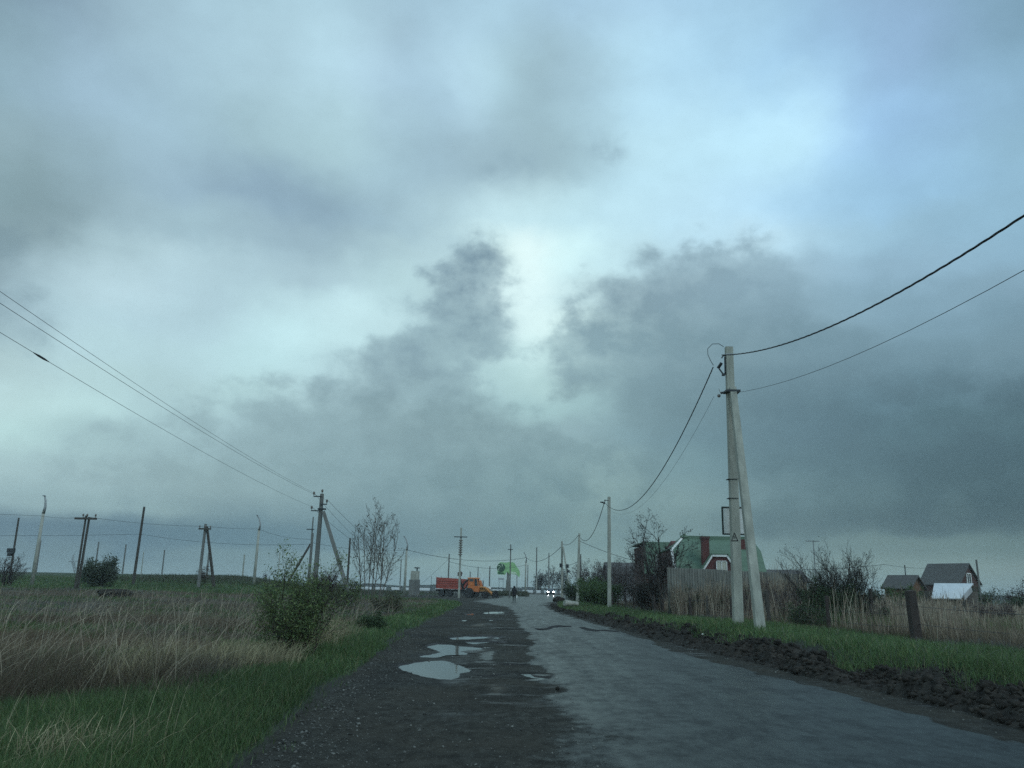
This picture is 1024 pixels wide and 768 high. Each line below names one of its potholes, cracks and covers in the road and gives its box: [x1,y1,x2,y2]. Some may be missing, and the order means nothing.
pothole [419,643,484,658]
pothole [396,661,472,680]
